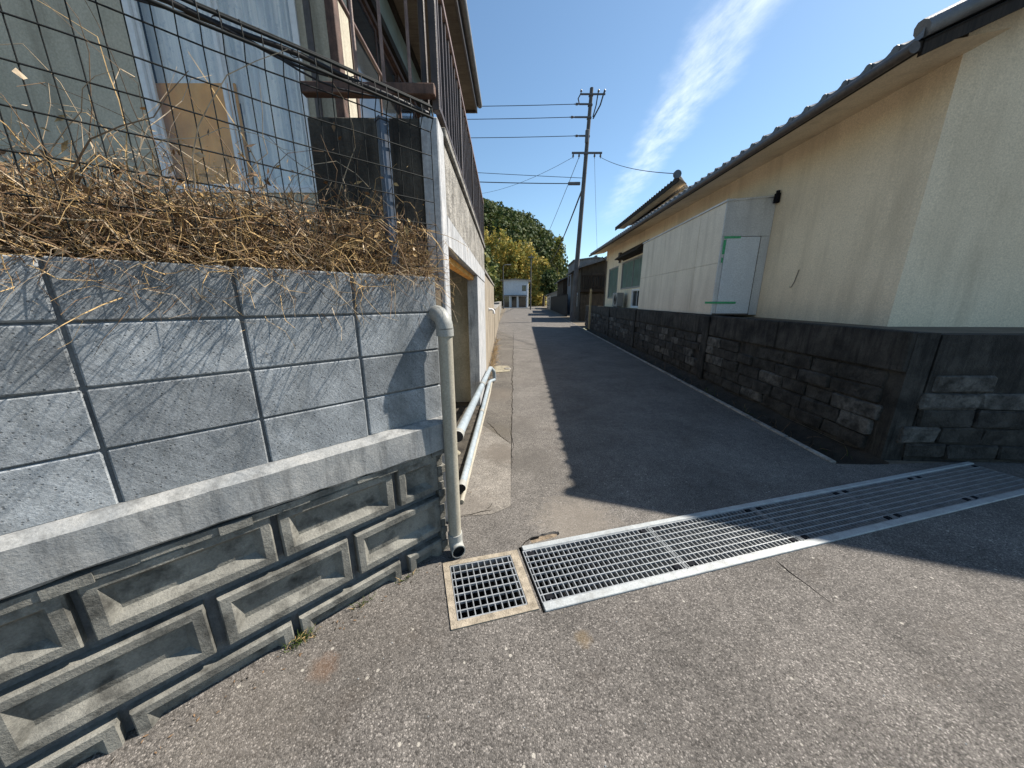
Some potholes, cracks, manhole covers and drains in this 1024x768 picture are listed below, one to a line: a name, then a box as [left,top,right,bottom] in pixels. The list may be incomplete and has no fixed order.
drain grate [648,507,803,569]
drain grate [837,476,975,519]
drain grate [450,555,527,621]
drain grate [522,527,687,606]
drain grate [911,464,1024,500]
drain grate [751,491,897,541]
crack [776,560,831,603]
